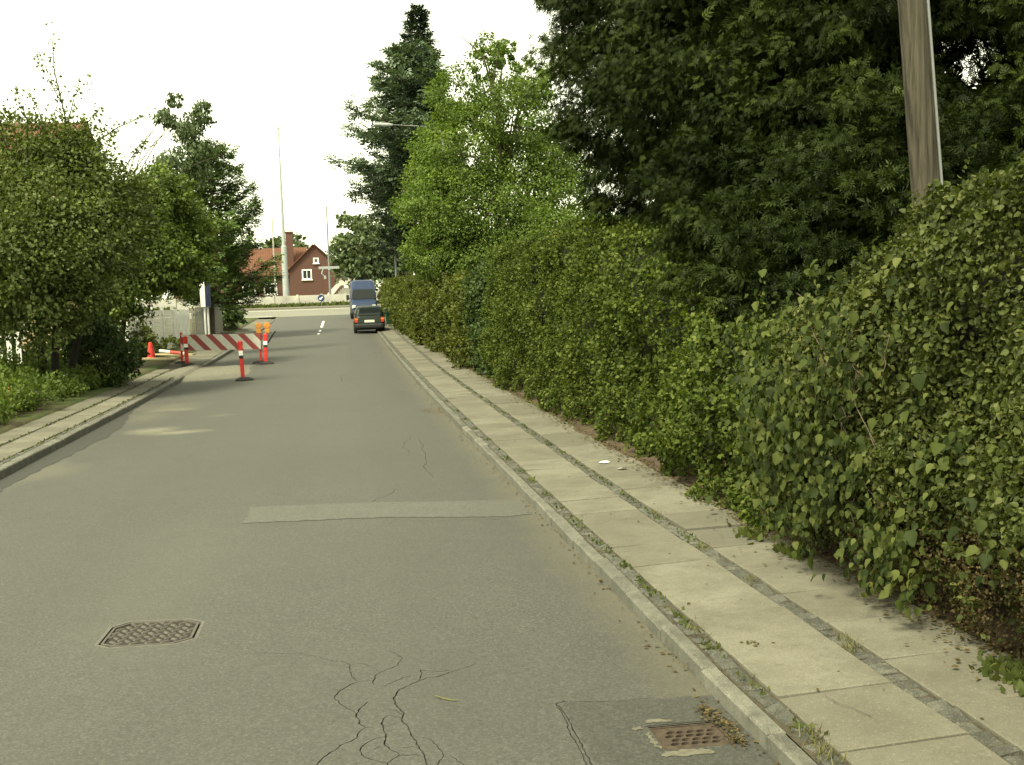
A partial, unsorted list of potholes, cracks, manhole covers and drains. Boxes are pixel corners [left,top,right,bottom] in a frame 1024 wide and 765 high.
manhole cover [94,618,205,648]
crack [252,651,474,765]
drain grate [649,722,737,751]
